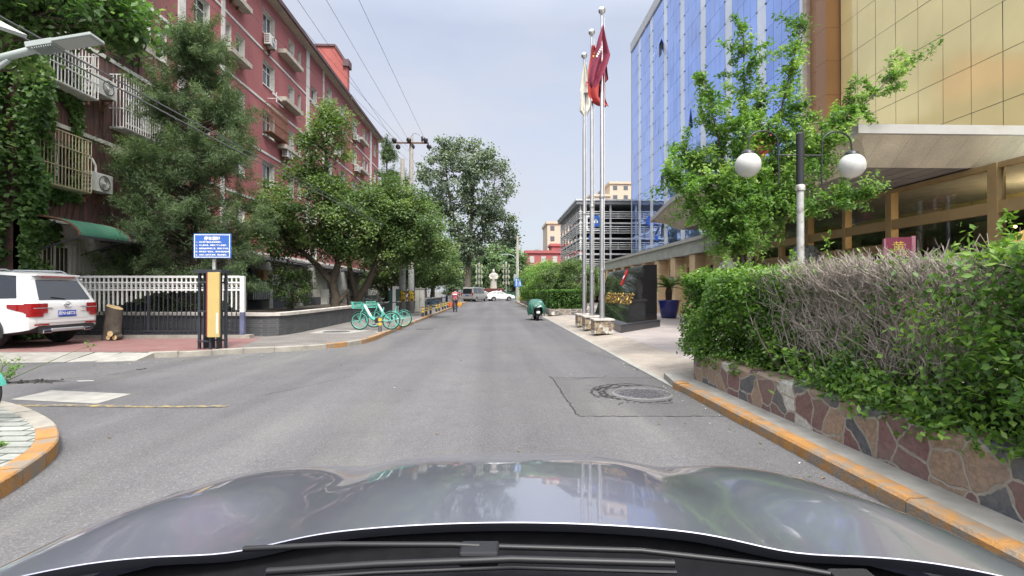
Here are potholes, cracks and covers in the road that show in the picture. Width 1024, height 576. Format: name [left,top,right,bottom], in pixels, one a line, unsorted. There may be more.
manhole cover [612,388,673,399]
